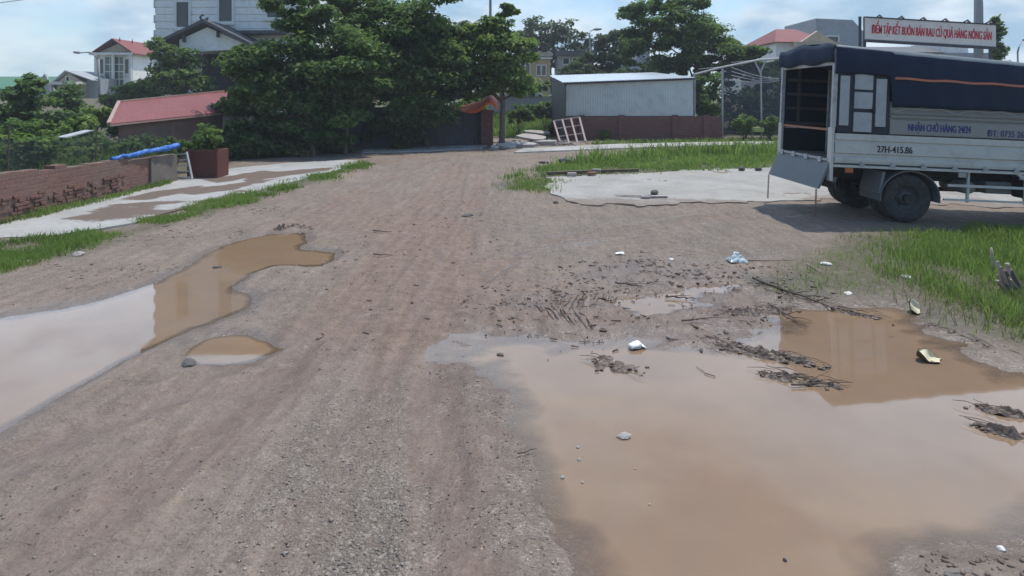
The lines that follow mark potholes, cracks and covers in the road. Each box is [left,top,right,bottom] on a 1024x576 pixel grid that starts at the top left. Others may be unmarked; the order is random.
pothole [0,227,344,442]
pothole [390,281,1024,576]
